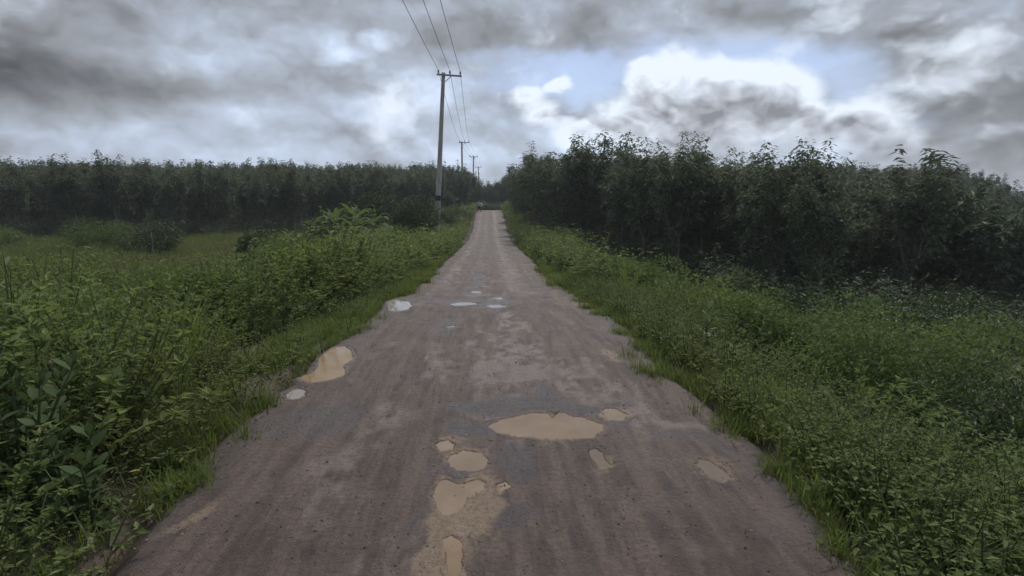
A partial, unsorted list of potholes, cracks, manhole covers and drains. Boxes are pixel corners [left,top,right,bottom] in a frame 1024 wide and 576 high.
pothole [275,386,314,402]
pothole [292,344,357,384]
pothole [686,455,741,488]
pothole [581,445,617,472]
pothole [426,436,464,455]
pothole [479,410,613,443]
pothole [437,446,498,476]
pothole [382,299,416,312]
pothole [433,528,477,576]
pothole [594,405,637,423]
pothole [421,474,498,521]
